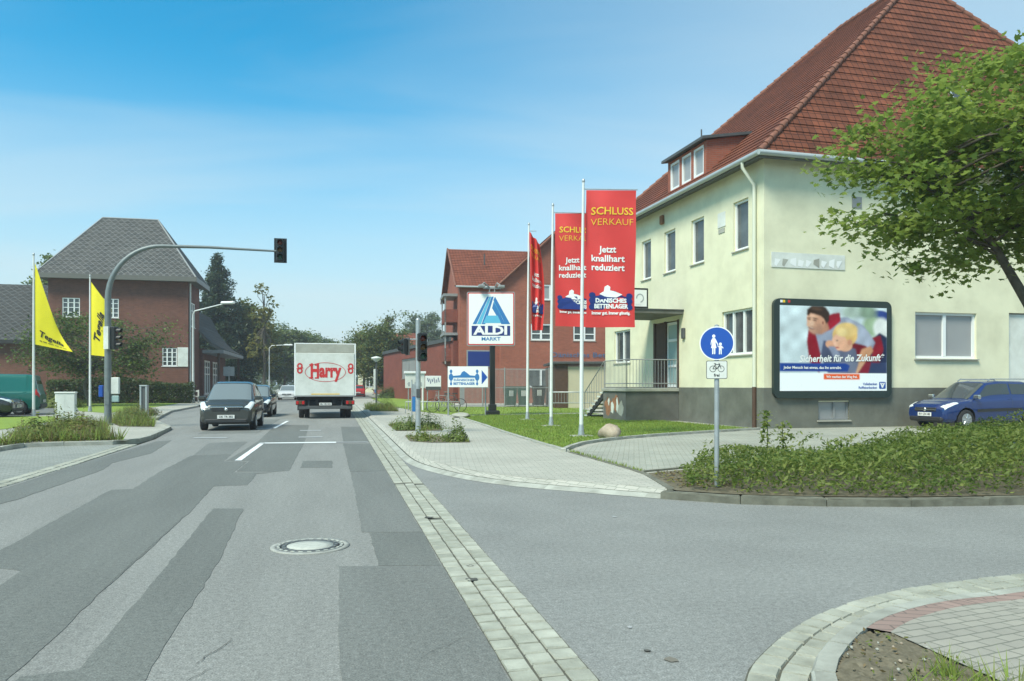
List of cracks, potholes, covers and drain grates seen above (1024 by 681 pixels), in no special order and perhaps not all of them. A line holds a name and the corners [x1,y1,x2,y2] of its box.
manhole cover [270,538,349,555]
